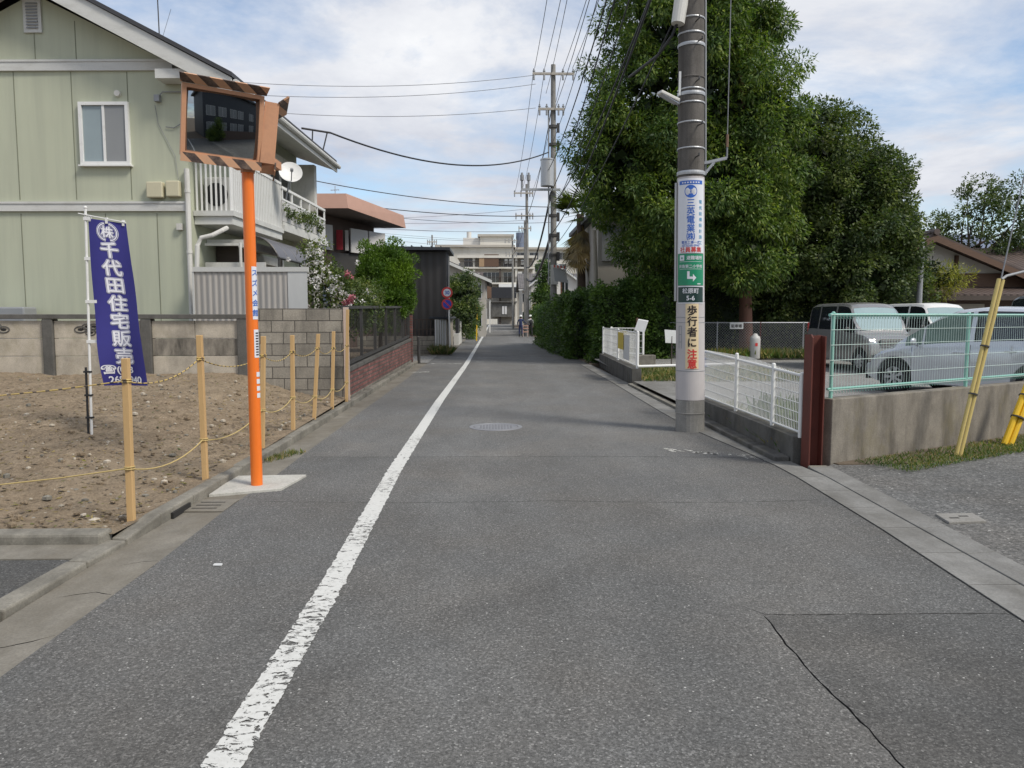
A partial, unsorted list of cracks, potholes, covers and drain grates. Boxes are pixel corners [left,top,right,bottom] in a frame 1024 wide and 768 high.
drain grate [171,499,239,519]
manhole cover [469,423,522,431]
